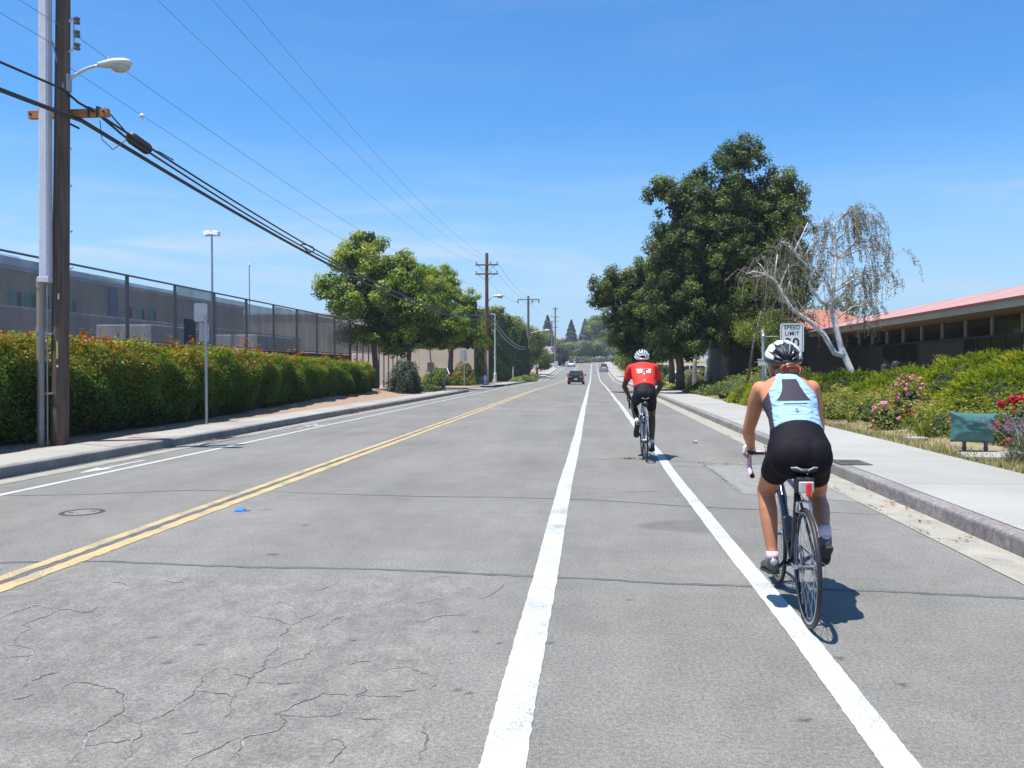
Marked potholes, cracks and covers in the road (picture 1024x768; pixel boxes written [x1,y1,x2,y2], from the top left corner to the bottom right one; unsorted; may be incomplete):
crack [0,602,436,767]
manhole cover [58,508,106,516]
